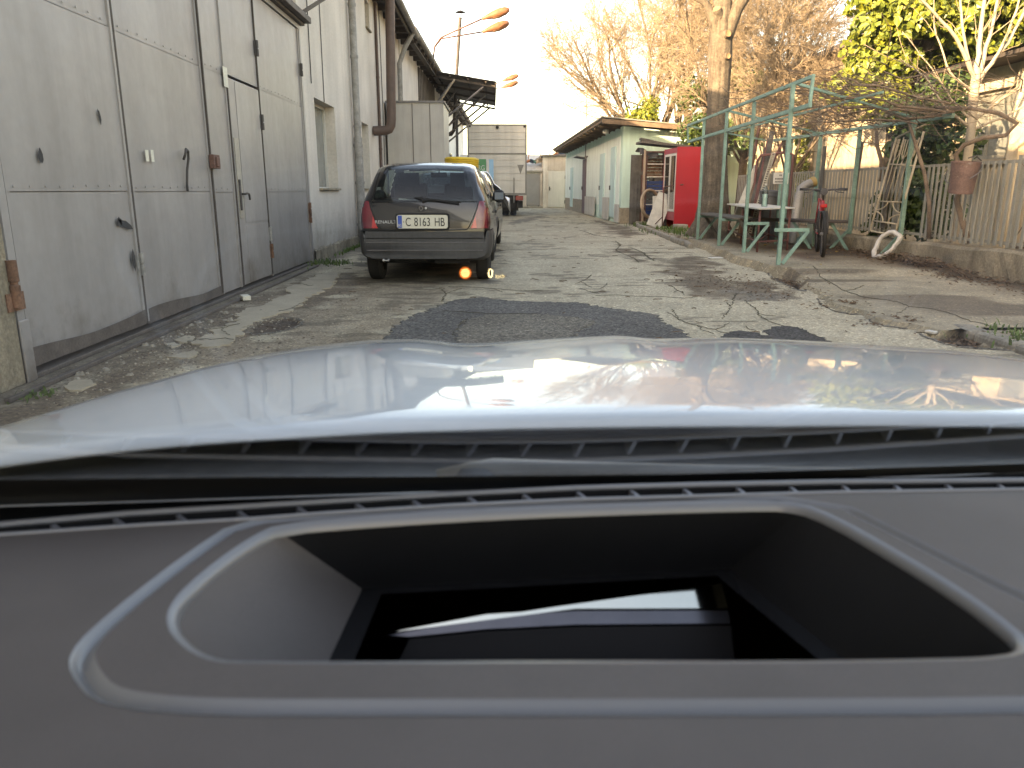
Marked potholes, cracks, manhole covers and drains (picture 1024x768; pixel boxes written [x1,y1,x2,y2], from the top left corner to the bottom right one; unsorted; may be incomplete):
pothole [914,331,1011,351]
pothole [245,317,305,335]
crack [575,275,819,337]
crack [813,266,1021,336]
